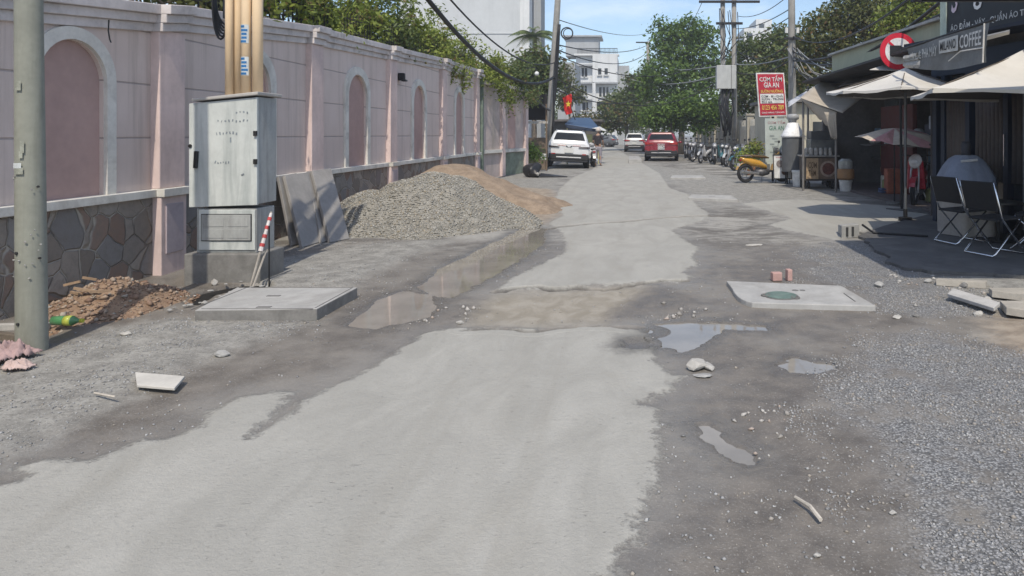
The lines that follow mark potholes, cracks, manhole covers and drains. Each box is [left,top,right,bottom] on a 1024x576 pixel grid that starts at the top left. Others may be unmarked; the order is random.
manhole cover [190,287,357,321]
pothole [639,320,773,354]
manhole cover [727,281,876,311]
pothole [691,420,772,472]
pothole [770,355,842,375]
